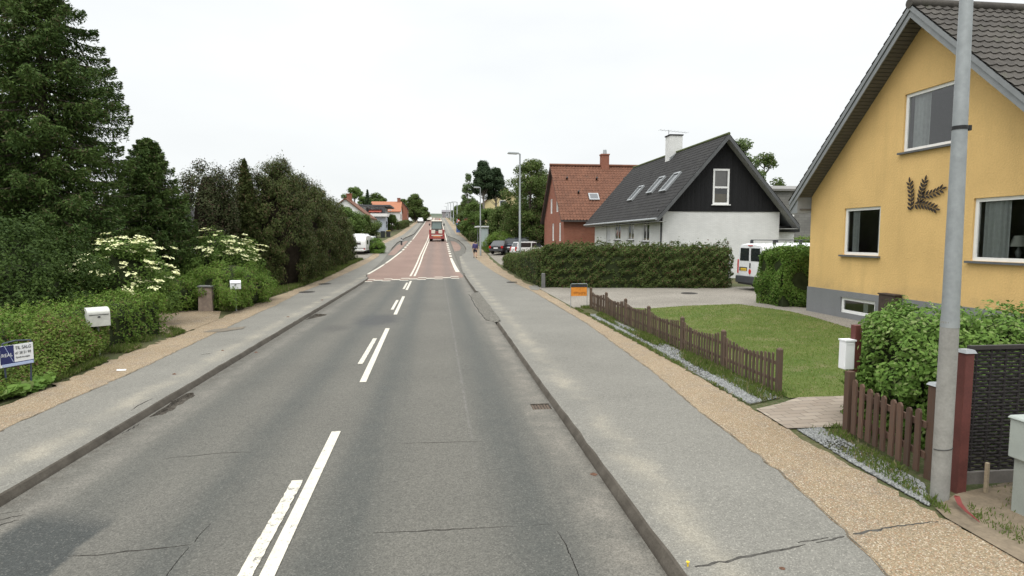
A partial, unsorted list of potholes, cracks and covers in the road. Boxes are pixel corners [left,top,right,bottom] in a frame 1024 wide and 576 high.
crack [76,523,211,576]
crack [378,524,579,576]
crack [695,521,939,568]
